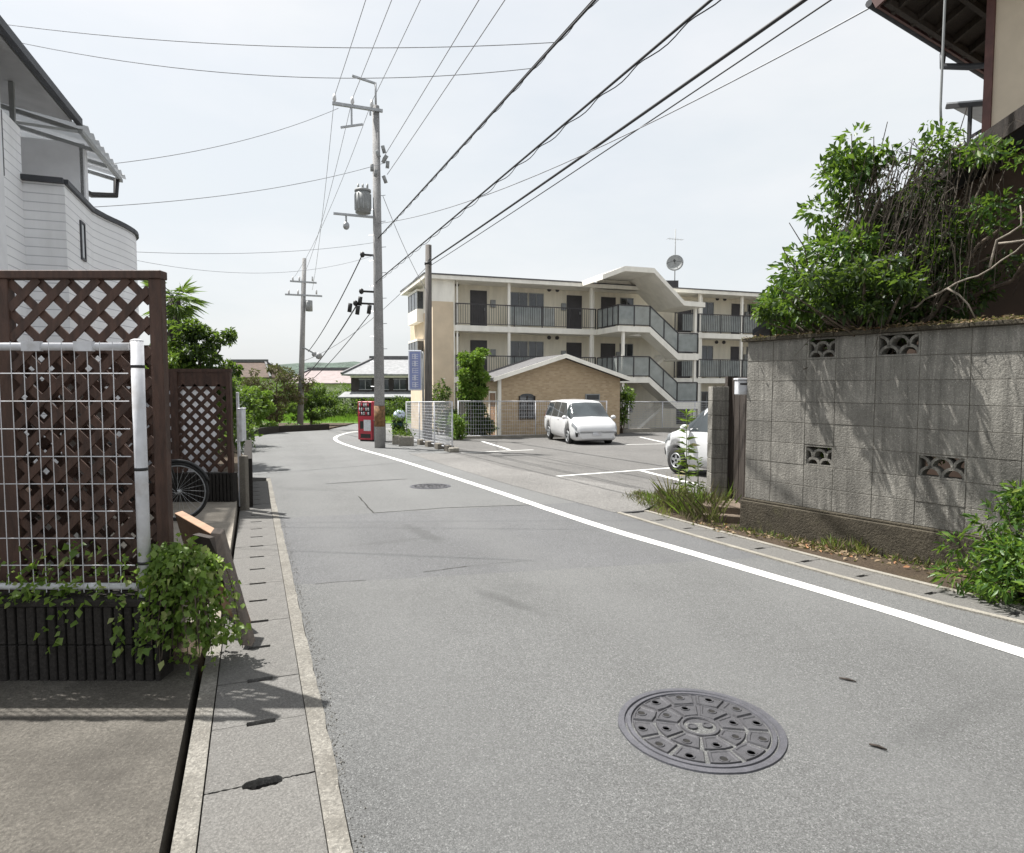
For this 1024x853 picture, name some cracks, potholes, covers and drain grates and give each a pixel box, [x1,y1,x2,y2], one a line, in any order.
manhole cover [618,688,788,775]
